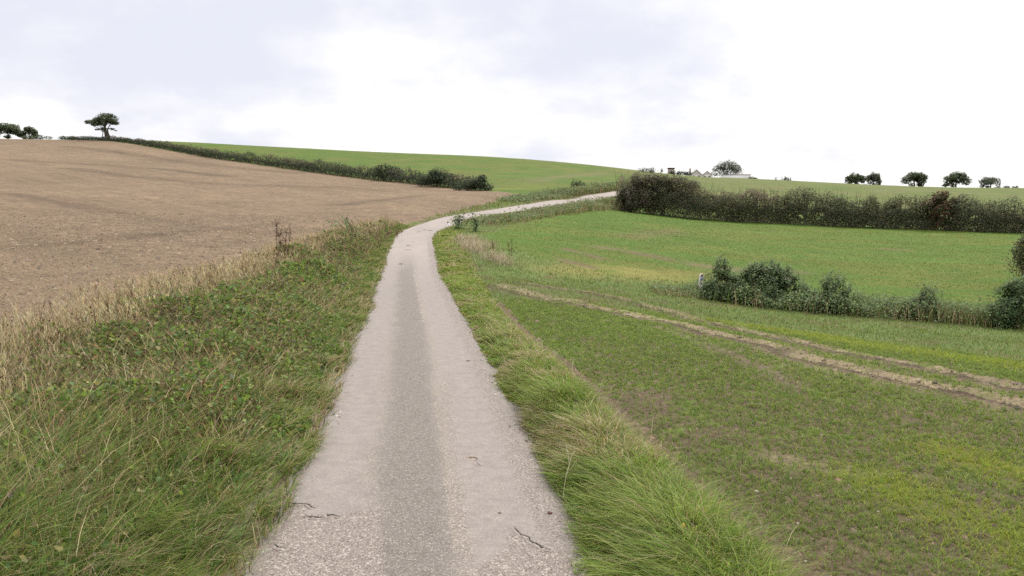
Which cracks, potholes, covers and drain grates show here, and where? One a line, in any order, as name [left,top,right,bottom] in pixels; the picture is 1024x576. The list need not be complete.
crack [269,542,287,551]
crack [282,501,342,520]
crack [509,526,554,552]
